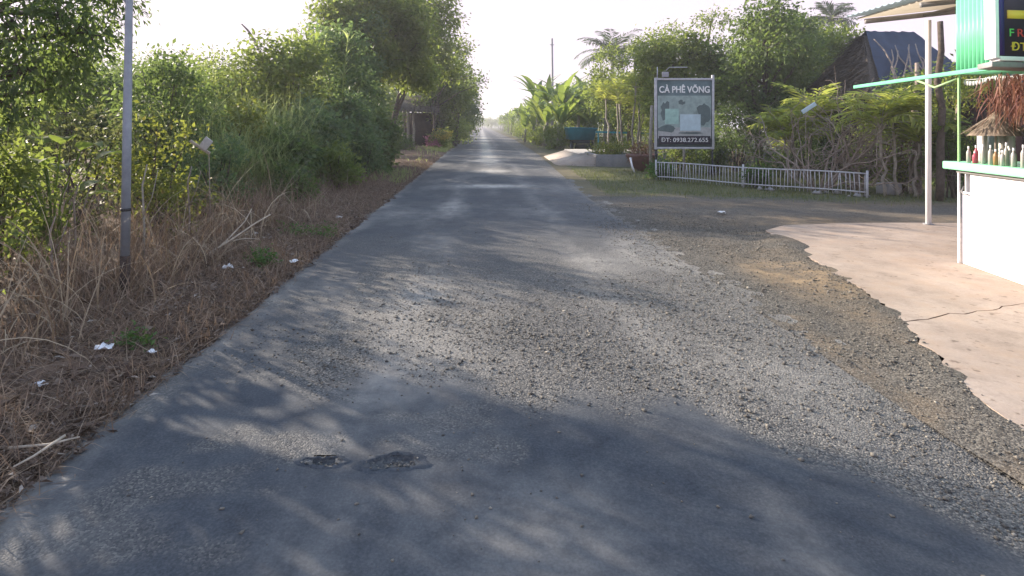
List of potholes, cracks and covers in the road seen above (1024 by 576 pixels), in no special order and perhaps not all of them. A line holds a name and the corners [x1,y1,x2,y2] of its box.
pothole [293,455,353,469]
pothole [350,450,434,474]
